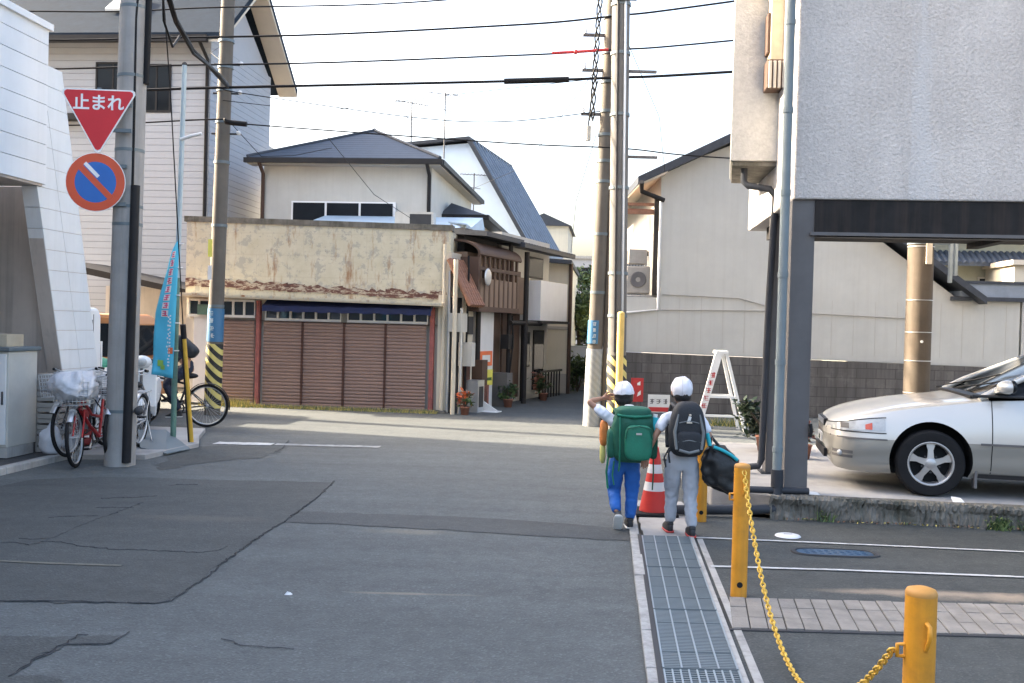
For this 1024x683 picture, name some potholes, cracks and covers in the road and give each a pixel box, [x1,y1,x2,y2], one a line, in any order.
crack [1,484,228,553]
crack [8,631,130,677]
crack [221,638,293,649]
manhole cover [790,547,880,558]
